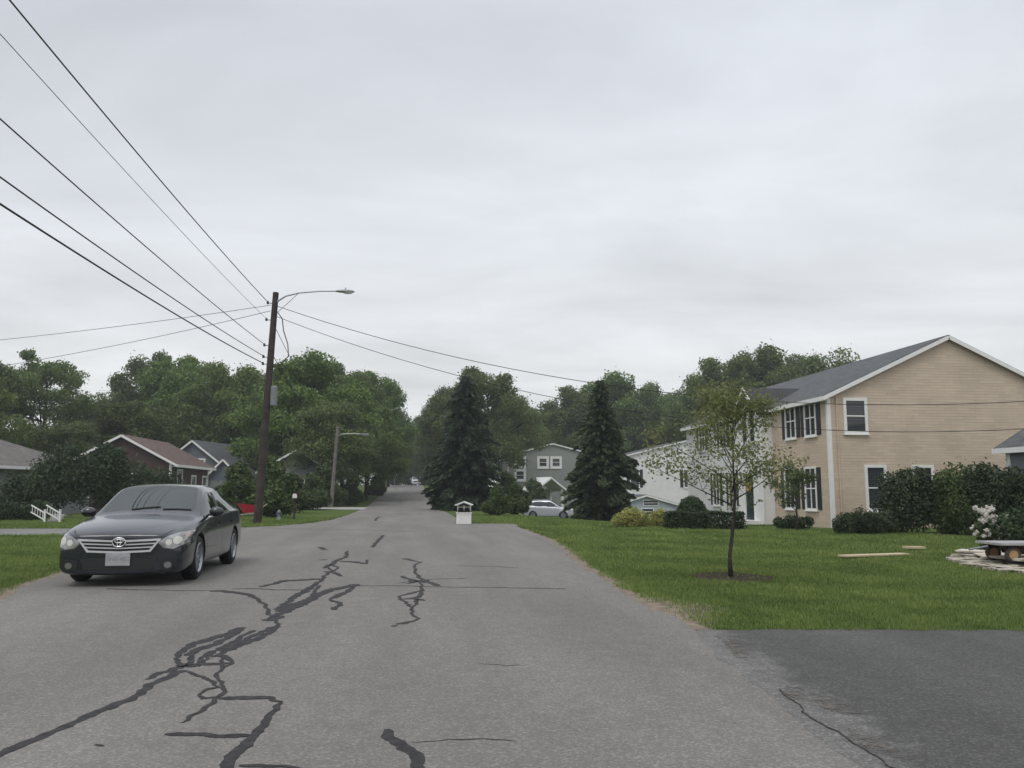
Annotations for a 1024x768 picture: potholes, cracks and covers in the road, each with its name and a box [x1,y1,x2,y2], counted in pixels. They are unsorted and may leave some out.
crack [115,578,563,591]
